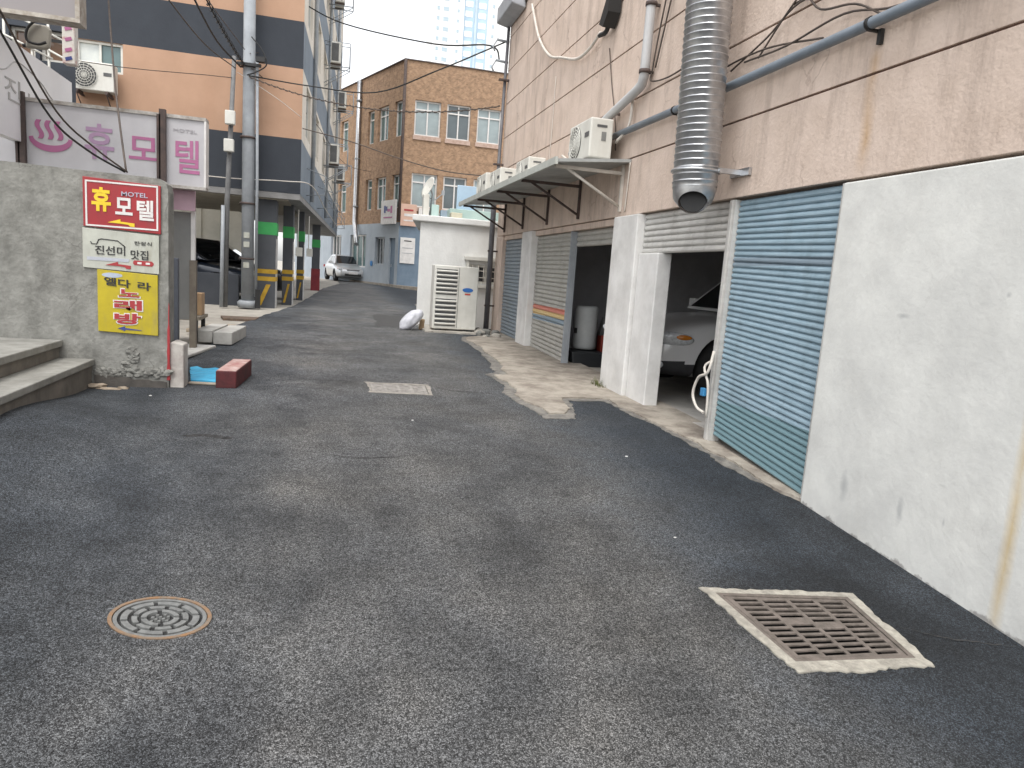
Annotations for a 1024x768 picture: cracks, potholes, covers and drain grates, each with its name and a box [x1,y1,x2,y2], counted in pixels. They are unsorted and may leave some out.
drain grate [699,587,935,674]
crack [907,628,1023,648]
manhole cover [107,596,212,640]
